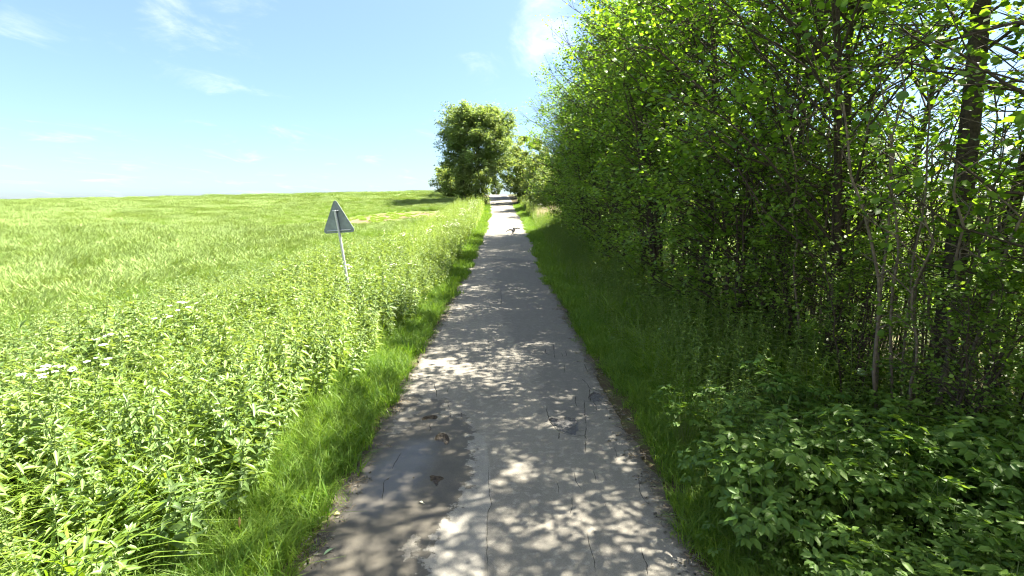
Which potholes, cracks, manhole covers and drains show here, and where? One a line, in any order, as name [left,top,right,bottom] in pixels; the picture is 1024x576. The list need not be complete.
crack [545,345,606,451]
pothole [589,391,604,402]
pothole [548,416,579,435]
pothole [434,433,450,445]
